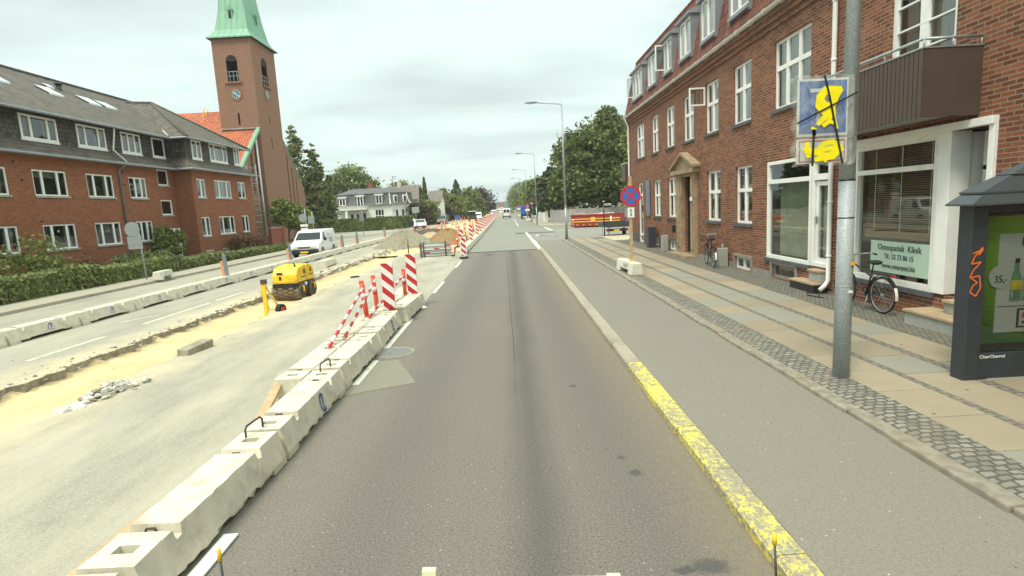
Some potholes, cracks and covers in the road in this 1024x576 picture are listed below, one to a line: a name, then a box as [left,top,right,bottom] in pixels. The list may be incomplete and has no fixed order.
manhole cover [374,347,415,358]
